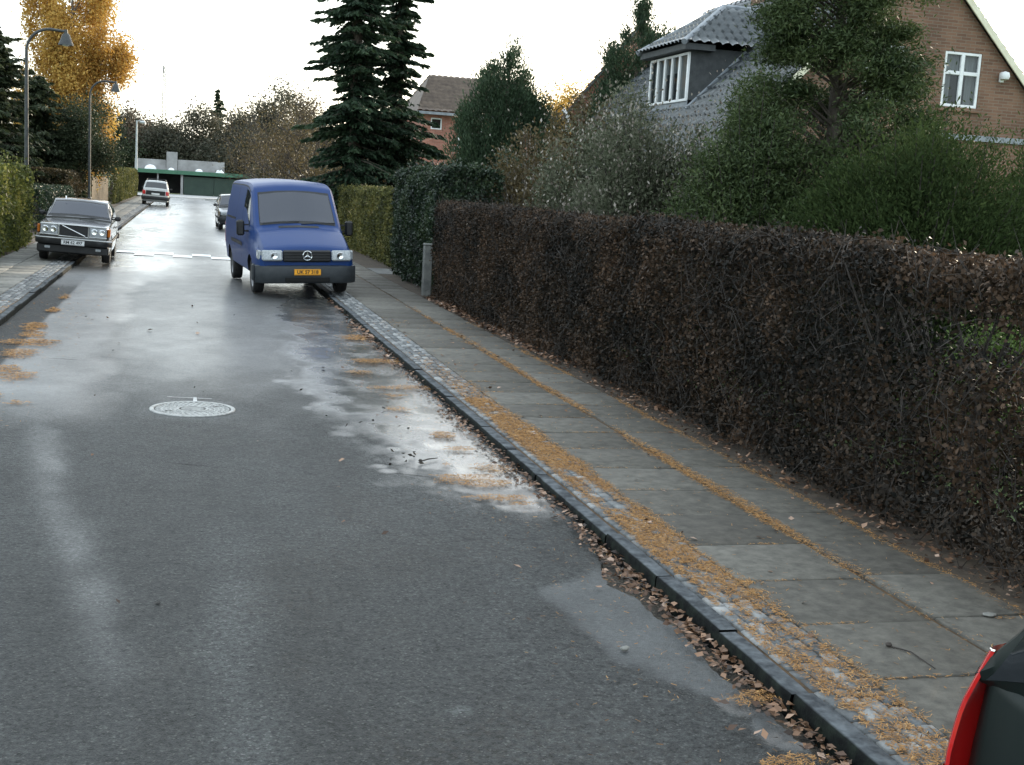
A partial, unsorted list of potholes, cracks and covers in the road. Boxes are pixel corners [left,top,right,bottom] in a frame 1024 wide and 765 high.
manhole cover [149,401,235,417]
